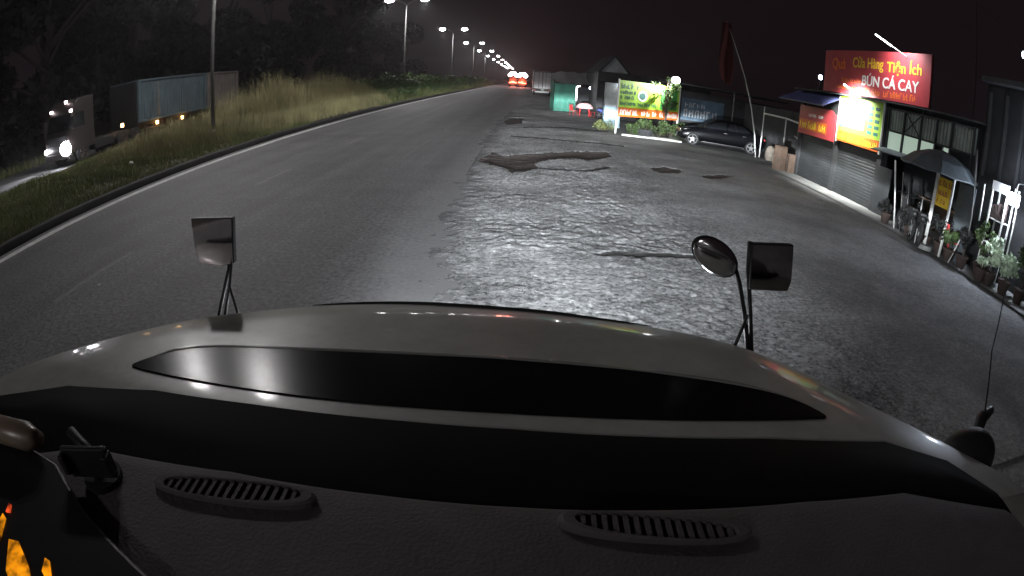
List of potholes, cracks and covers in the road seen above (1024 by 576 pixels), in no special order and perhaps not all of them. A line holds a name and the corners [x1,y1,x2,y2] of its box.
crack [511,127,624,147]
pothole [479,151,612,173]
